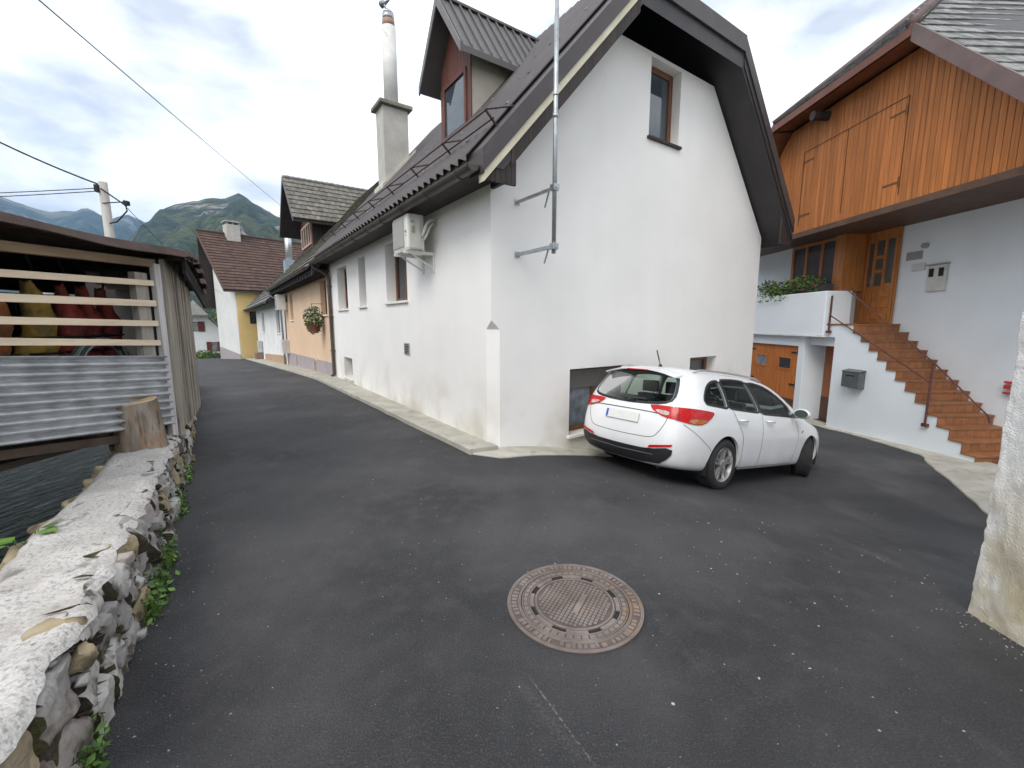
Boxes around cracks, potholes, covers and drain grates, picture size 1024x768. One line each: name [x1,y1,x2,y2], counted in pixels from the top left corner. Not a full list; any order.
manhole cover [507,564,644,654]
